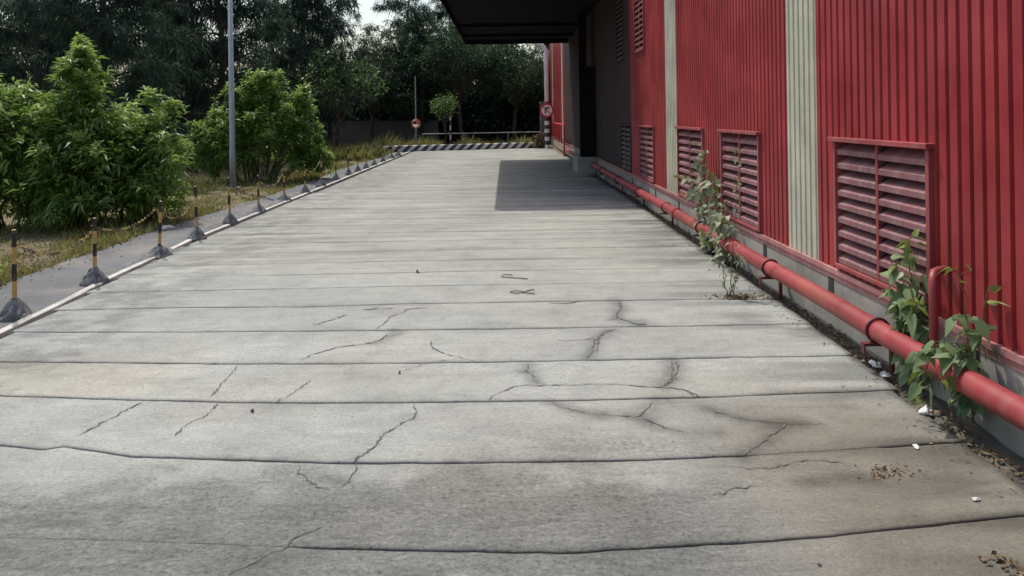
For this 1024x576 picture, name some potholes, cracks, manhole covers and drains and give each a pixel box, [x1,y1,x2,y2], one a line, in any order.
crack [556,300,646,358]
crack [297,404,417,489]
crack [229,525,324,574]
crack [490,361,842,494]
crack [165,365,238,440]
crack [301,307,427,360]
